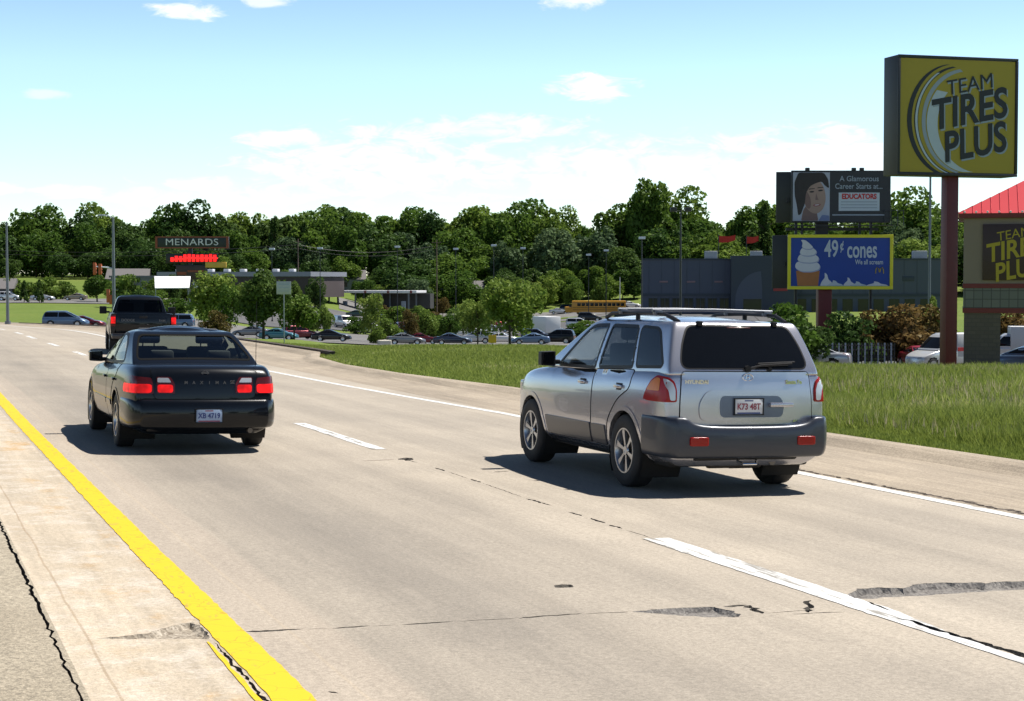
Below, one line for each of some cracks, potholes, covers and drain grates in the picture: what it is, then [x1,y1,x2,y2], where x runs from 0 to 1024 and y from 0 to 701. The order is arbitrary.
crack [725,600,831,614]
pothole [634,607,741,617]
pothole [98,622,210,639]
crack [912,621,1024,657]
pothole [848,581,1024,603]
crack [0,522,84,701]
